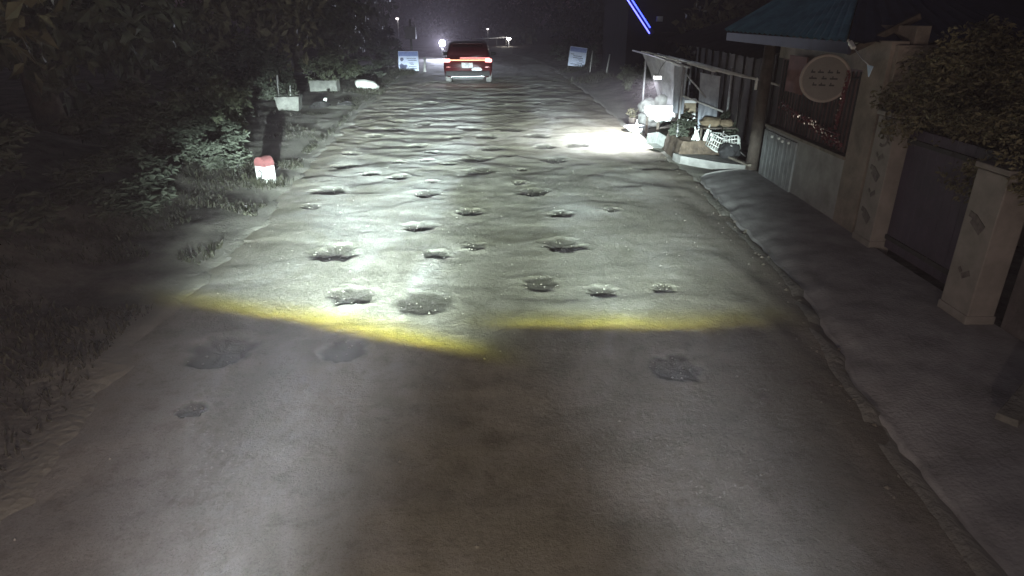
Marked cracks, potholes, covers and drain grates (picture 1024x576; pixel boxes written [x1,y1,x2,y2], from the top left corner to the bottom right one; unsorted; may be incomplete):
pothole [162,324,285,377]
pothole [574,281,628,302]
pothole [542,207,584,220]
pothole [451,240,496,255]
pothole [447,206,494,219]
pothole [504,185,562,200]
pothole [643,280,687,295]
pothole [509,272,570,298]
pothole [393,220,447,235]
pothole [370,284,476,325]
pothole [294,240,372,265]
pothole [527,234,603,255]
